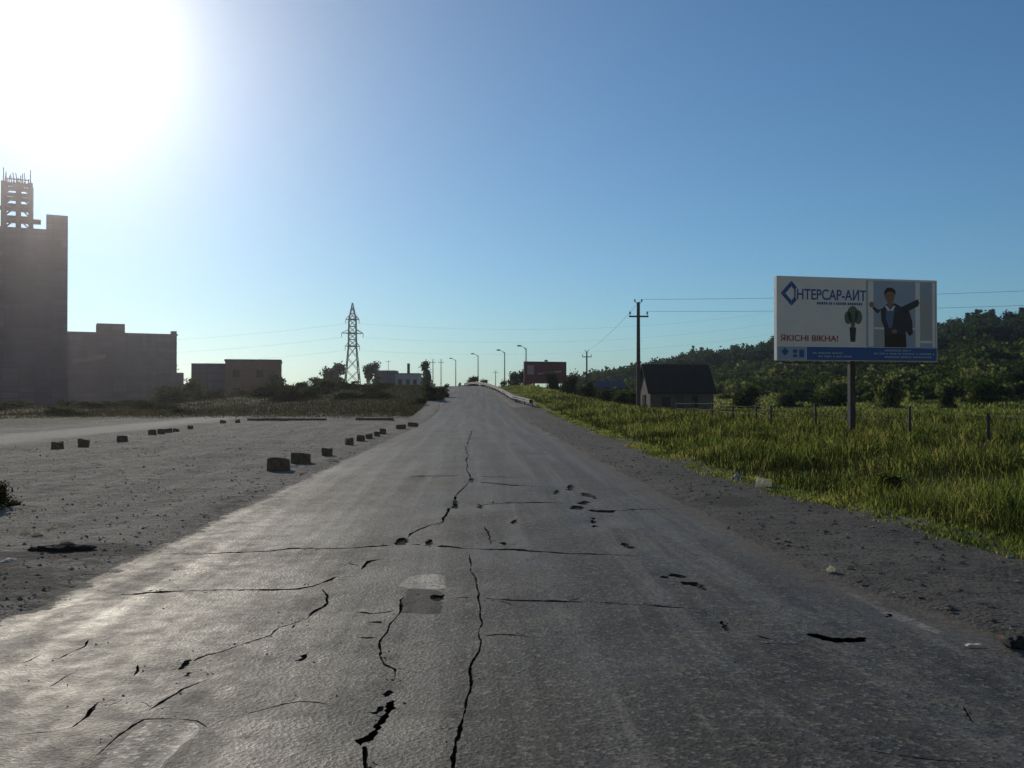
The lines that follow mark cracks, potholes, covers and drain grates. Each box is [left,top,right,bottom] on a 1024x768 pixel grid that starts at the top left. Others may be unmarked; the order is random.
crack [107,431,707,768]
pothole [806,633,867,643]
